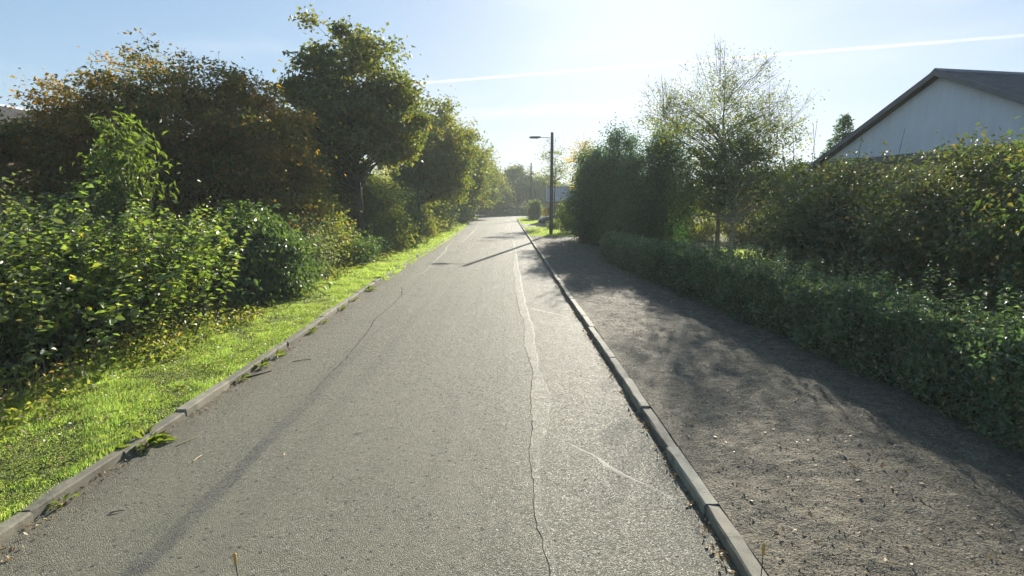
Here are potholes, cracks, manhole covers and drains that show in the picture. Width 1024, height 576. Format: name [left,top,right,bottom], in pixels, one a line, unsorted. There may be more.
crack [312,227,508,393]
